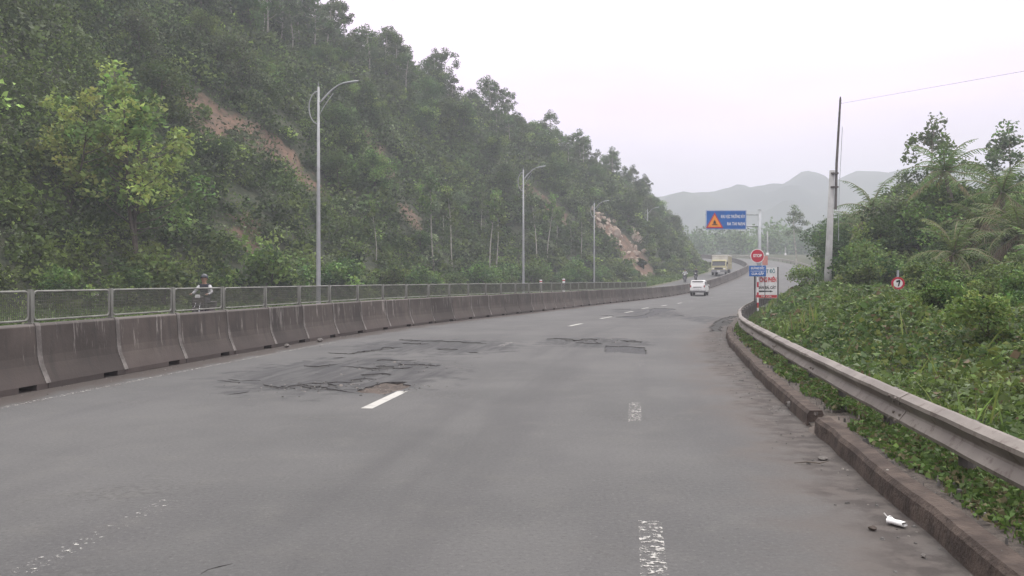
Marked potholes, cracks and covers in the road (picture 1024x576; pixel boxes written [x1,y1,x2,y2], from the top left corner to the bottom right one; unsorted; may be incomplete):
crack [217,340,487,395]
pothole [357,381,411,394]
